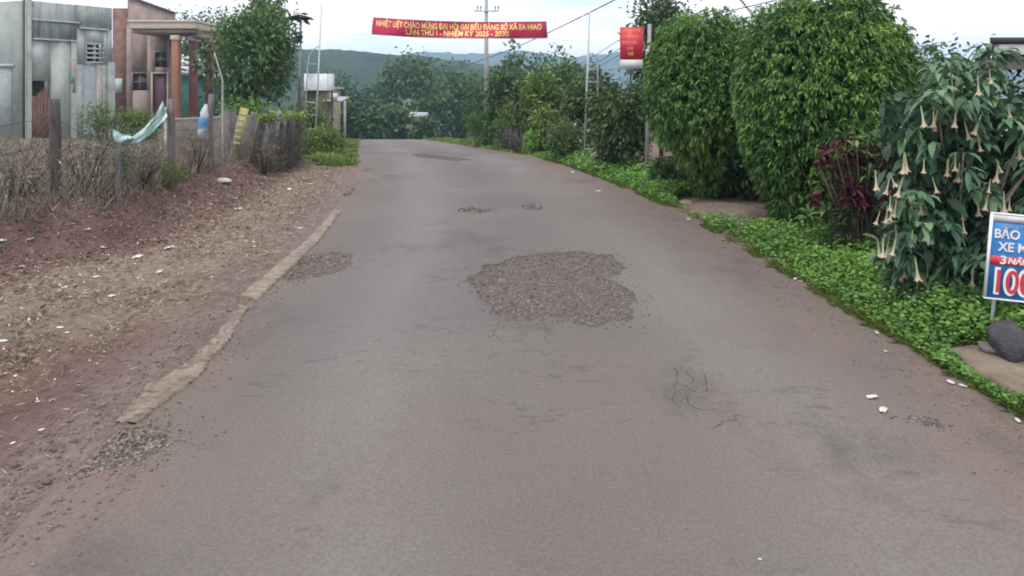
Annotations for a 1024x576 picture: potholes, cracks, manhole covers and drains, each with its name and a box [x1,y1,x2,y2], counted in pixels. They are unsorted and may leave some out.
crack [488,317,558,356]
pothole [512,201,548,210]
pothole [278,248,373,288]
crack [665,368,747,429]
pothole [433,246,677,343]
pothole [454,206,513,217]
